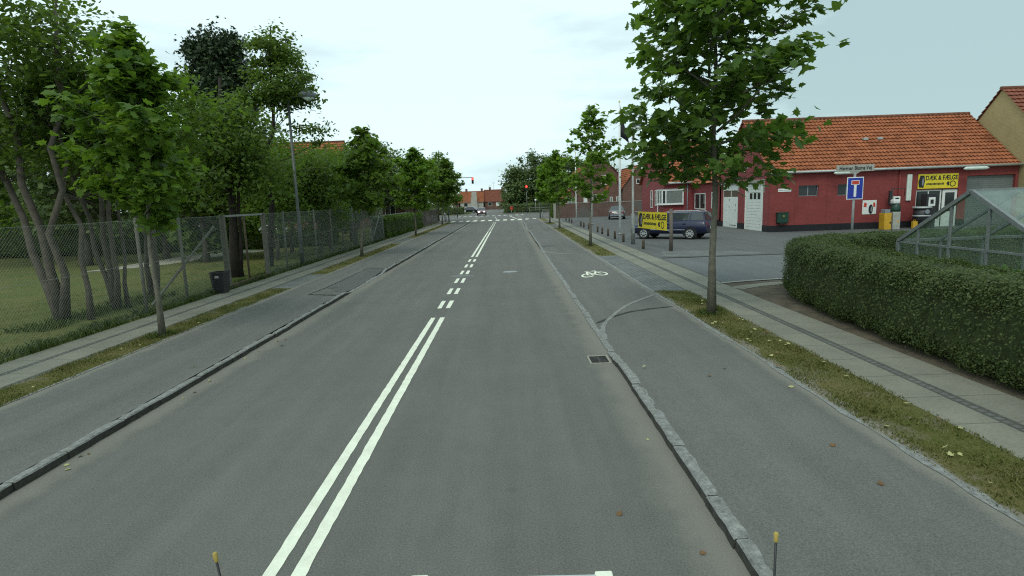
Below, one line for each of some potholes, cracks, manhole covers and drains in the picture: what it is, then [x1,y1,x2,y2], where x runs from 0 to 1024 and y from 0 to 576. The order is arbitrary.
drain grate [587,355,612,364]
